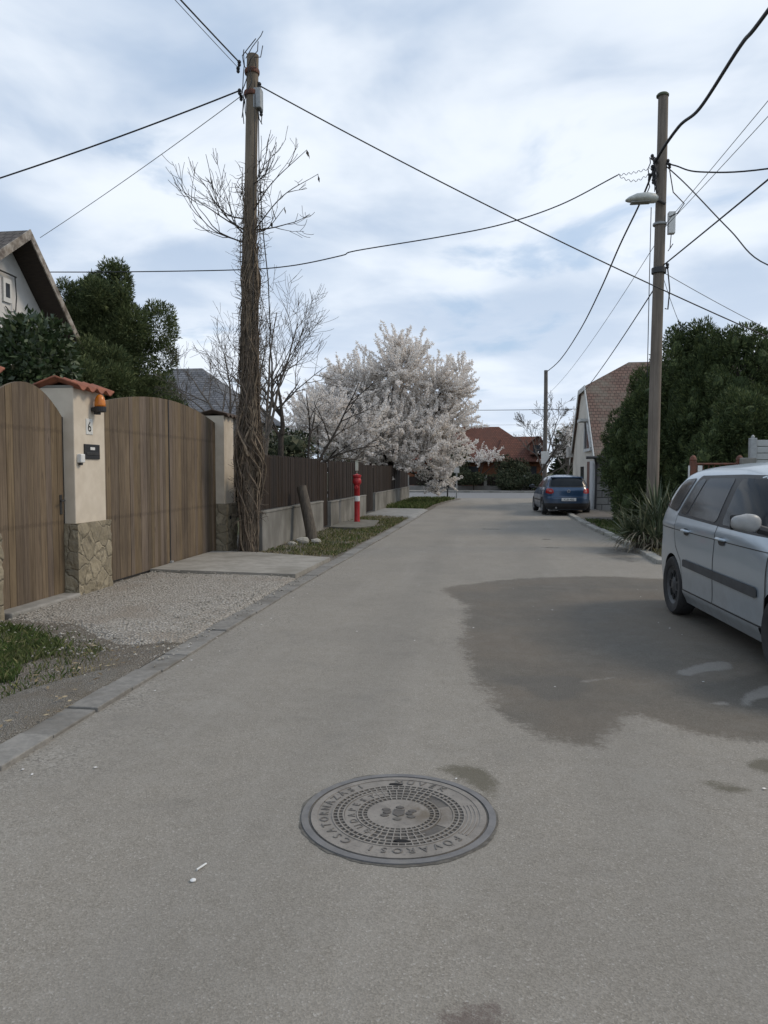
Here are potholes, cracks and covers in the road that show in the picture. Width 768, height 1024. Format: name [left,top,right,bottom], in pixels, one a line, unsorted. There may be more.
manhole cover [299,774,499,868]
